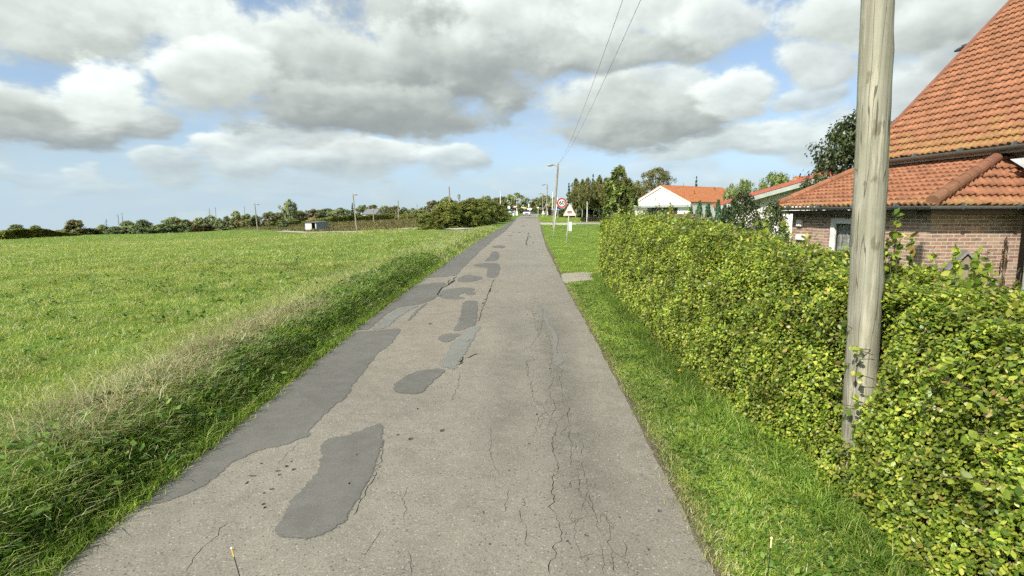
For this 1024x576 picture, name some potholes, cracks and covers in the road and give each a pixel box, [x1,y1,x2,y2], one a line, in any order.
crack [355,444,384,513]
crack [525,298,629,574]
